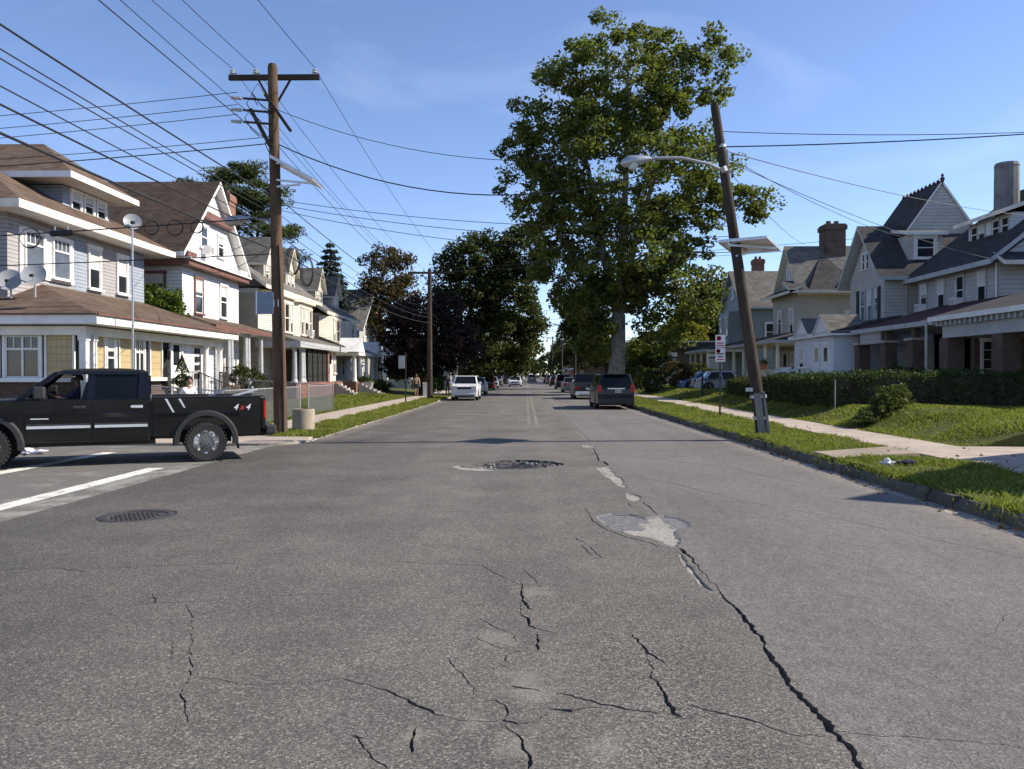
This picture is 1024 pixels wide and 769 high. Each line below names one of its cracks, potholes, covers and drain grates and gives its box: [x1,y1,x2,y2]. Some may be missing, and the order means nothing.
pothole [473,460,564,469]
crack [398,561,550,662]
crack [92,594,824,769]
